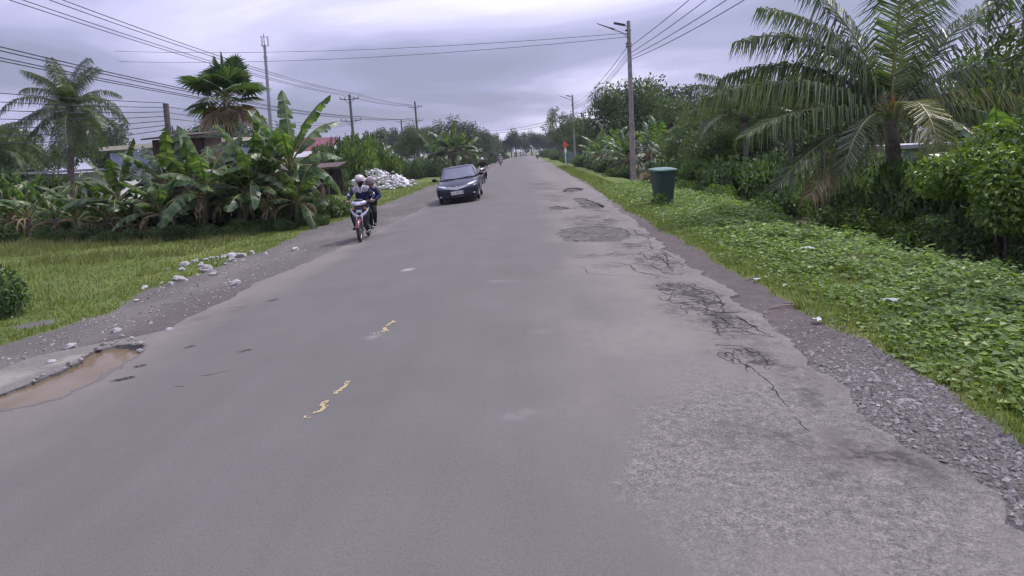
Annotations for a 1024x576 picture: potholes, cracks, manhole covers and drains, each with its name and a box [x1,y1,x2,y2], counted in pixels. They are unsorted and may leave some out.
pothole [554,226,634,242]
crack [578,210,809,431]
pothole [0,336,159,412]
pothole [572,198,606,209]
